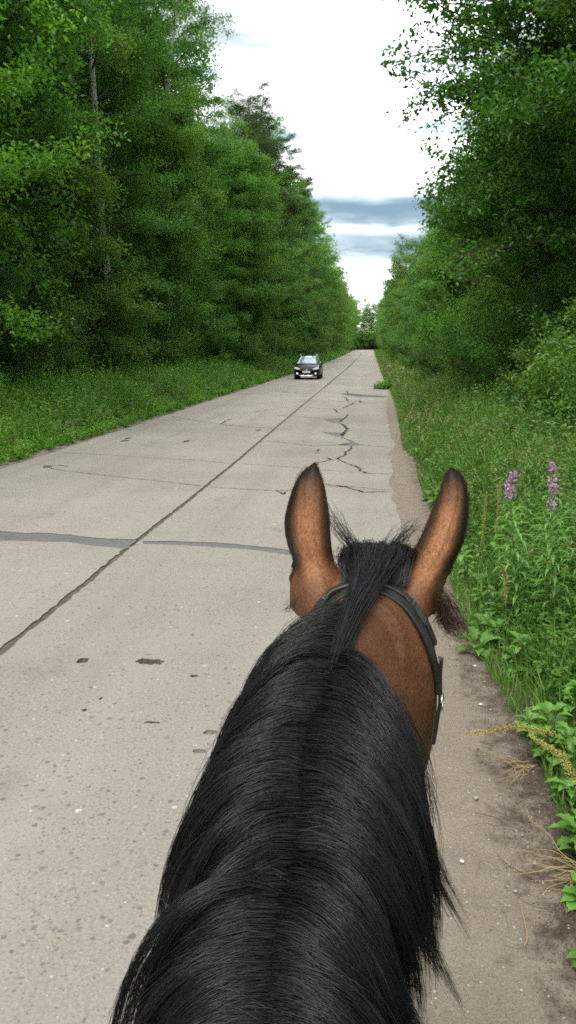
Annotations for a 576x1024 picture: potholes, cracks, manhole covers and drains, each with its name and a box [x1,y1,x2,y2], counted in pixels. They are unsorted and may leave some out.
crack [43,391,392,495]
